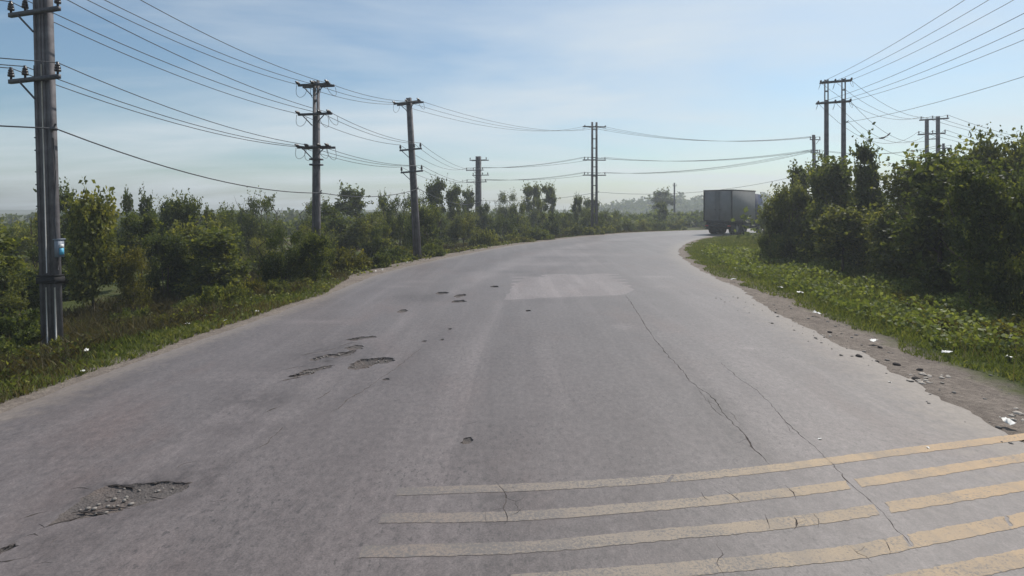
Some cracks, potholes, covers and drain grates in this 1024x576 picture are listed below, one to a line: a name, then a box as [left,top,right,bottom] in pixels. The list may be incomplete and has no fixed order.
crack [318,349,420,411]
crack [485,482,524,524]
crack [628,300,769,464]
pothole [289,365,333,378]
pothole [348,357,395,370]
pothole [47,480,193,526]
pothole [310,350,356,361]
crack [721,363,917,550]
